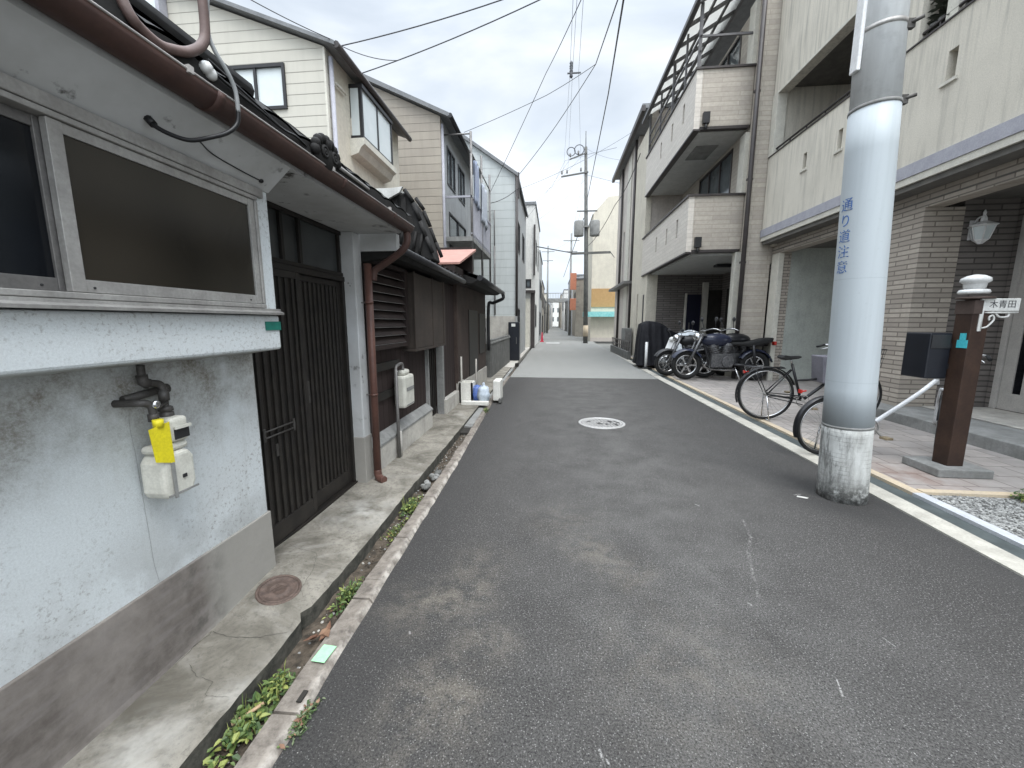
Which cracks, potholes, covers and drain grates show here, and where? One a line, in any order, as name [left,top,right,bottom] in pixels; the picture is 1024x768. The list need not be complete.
manhole cover [255,574,302,606]
manhole cover [578,417,625,429]
crack [180,631,287,697]
